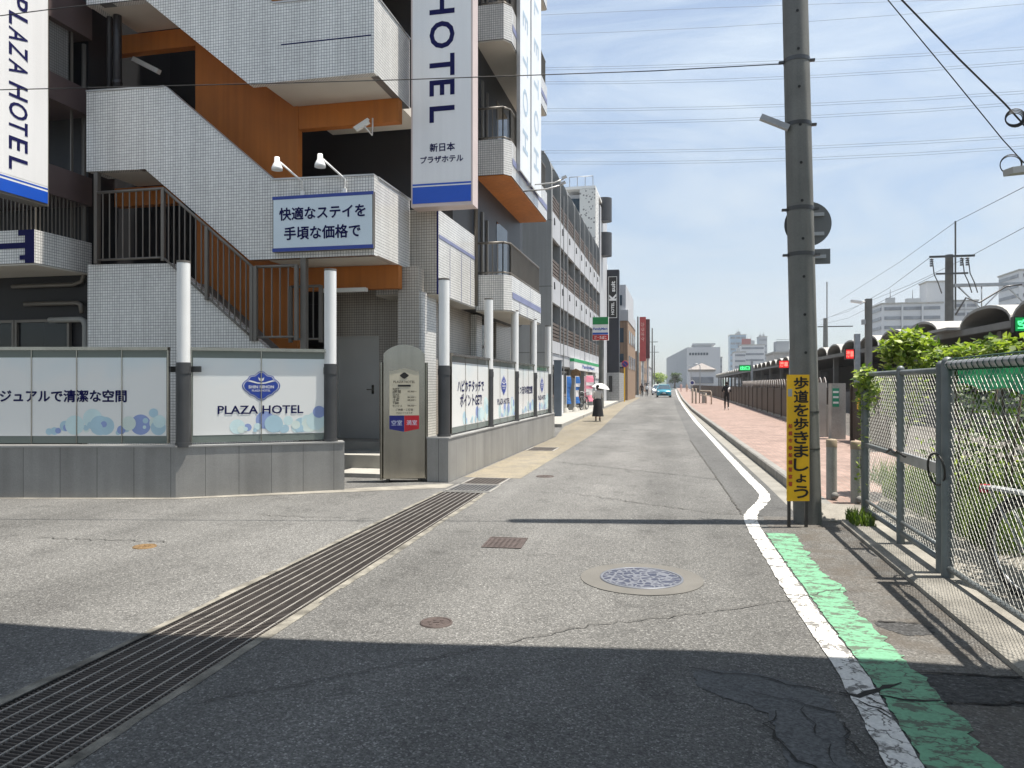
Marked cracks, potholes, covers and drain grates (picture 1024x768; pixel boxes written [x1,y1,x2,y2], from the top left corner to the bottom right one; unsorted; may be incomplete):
manhole cover [420,617,452,628]
crack [685,666,1024,768]
manhole cover [481,537,528,549]
drain grate [461,477,511,485]
drain grate [444,484,501,492]
manhole cover [581,563,704,596]
